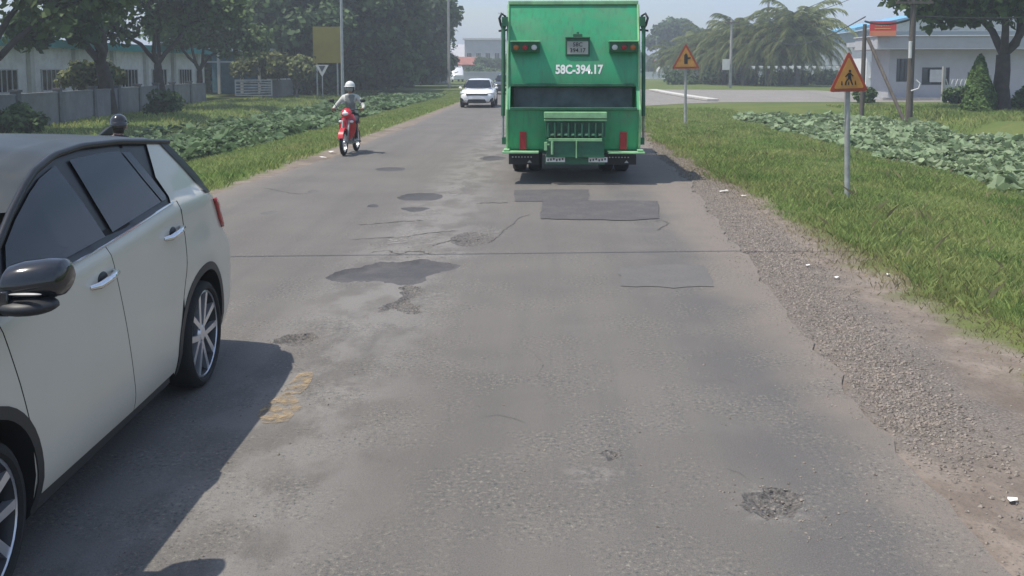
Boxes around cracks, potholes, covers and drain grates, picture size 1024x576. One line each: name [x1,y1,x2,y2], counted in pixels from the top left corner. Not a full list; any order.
pothole [378,285,424,314]
pothole [273,332,318,346]
pothole [738,488,804,521]
crack [352,202,527,254]
pothole [450,232,495,247]
pothole [599,449,626,464]
